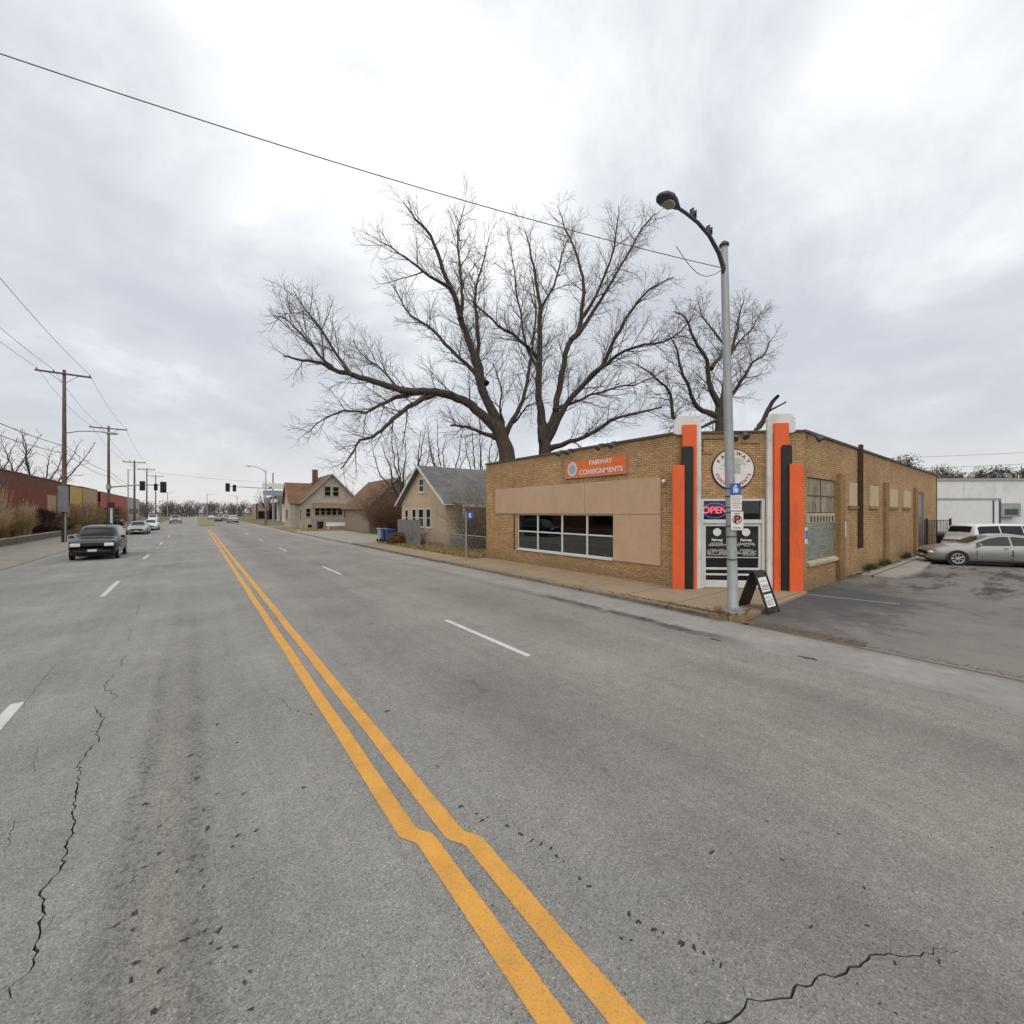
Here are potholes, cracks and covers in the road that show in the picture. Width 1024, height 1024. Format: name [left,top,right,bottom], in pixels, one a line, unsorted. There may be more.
crack [458,805,957,1024]
crack [2,610,138,998]
